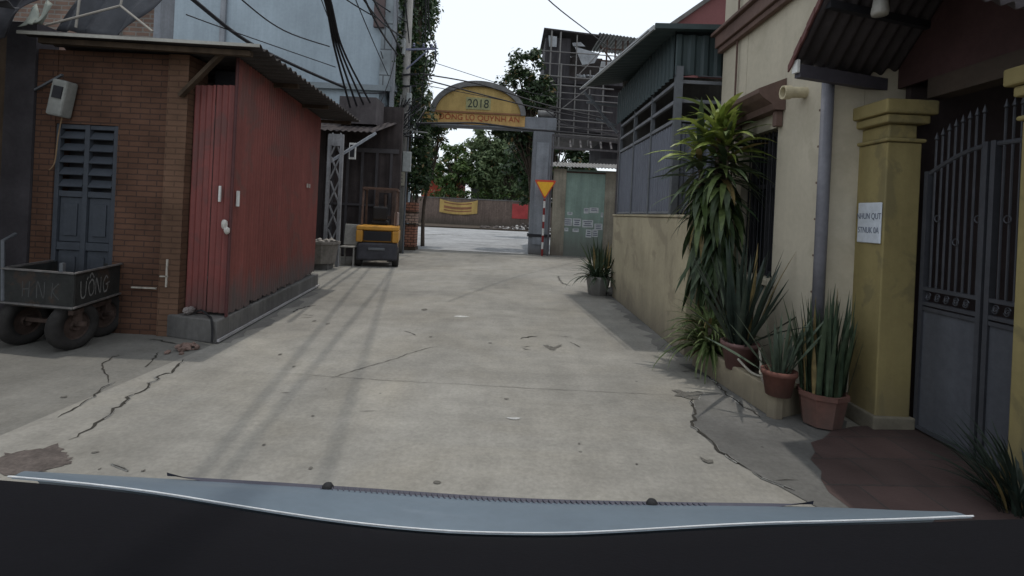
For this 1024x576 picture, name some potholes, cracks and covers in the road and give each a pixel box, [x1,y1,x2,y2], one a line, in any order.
crack [682,371,795,490]
crack [60,339,184,438]
